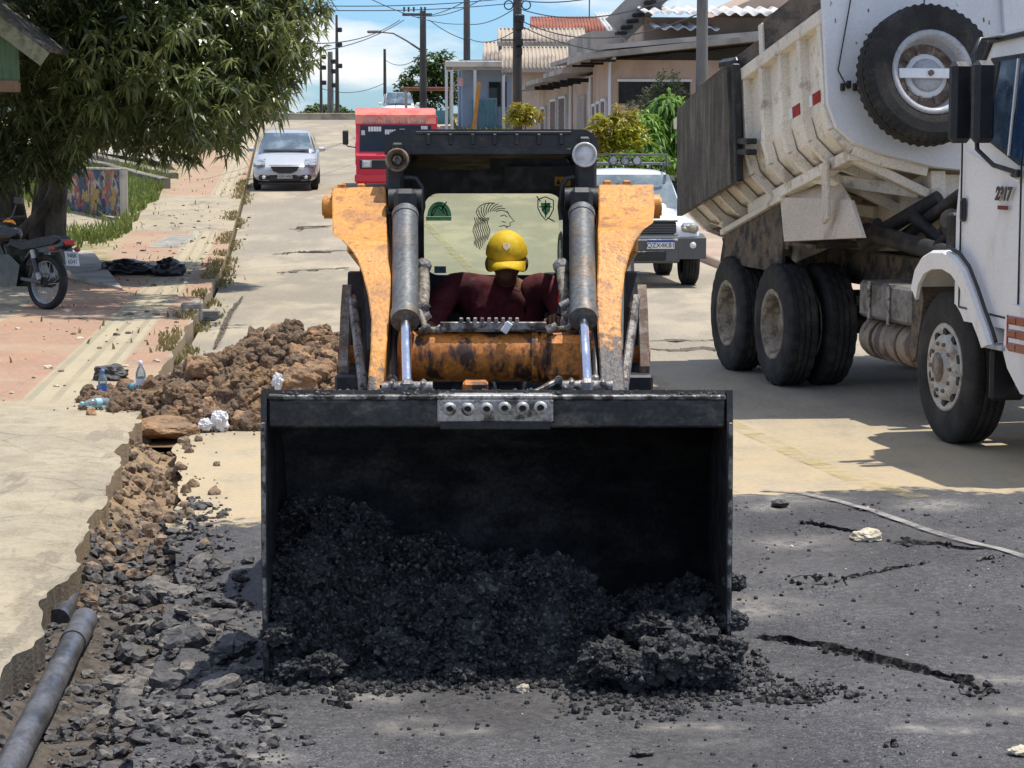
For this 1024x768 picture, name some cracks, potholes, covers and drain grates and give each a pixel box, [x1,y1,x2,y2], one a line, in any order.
crack [277,250,349,273]
crack [800,520,857,533]
crack [650,339,716,352]
crack [741,634,993,691]
